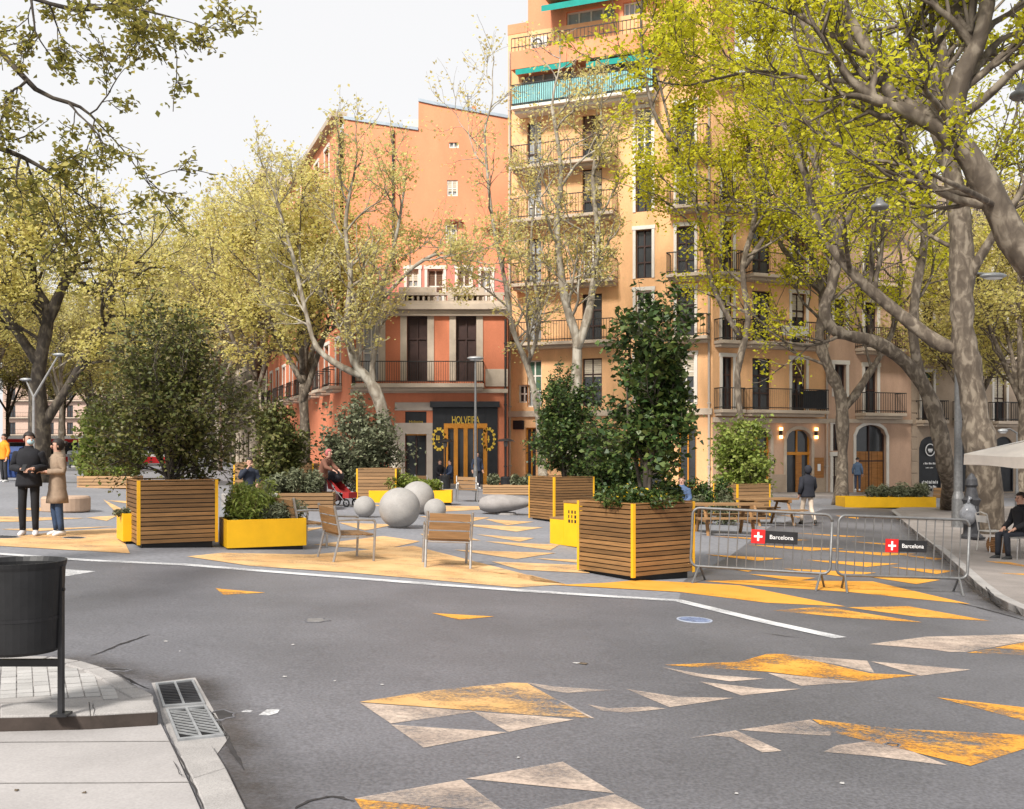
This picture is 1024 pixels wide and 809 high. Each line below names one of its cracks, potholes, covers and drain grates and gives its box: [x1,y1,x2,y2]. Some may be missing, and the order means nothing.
drain grate [166,704,224,741]
crack [295,796,354,808]
crack [93,635,146,655]
drain grate [155,679,205,708]
